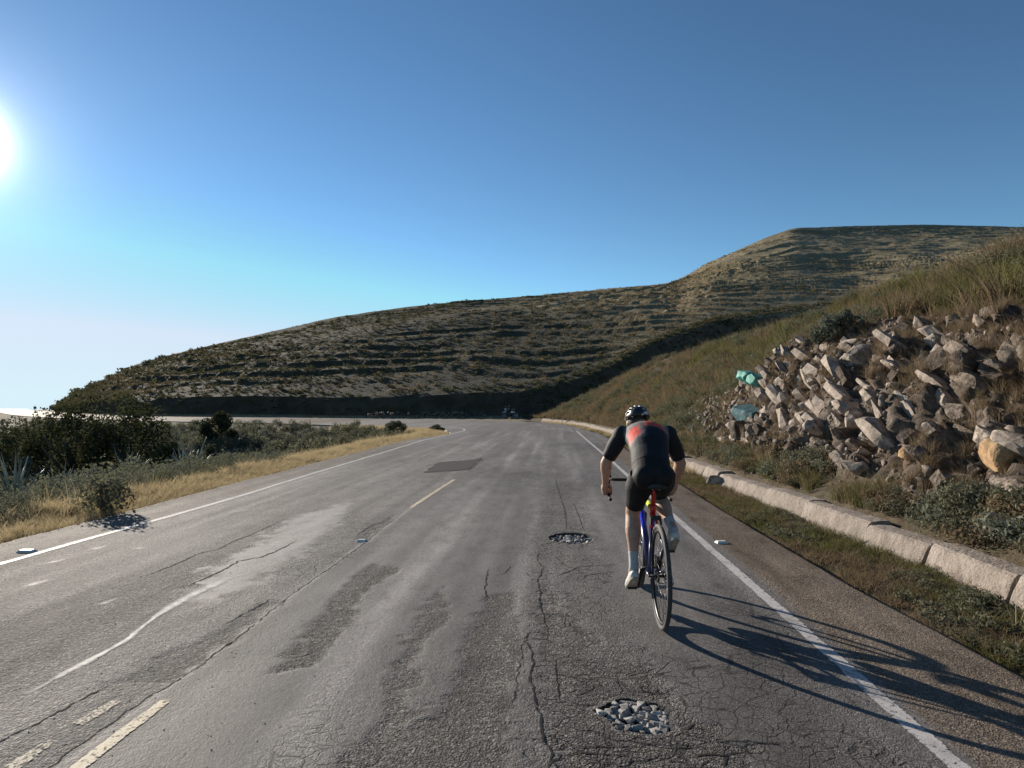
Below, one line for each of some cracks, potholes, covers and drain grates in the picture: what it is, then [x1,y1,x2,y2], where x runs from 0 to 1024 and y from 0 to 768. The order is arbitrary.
pothole [586,695,682,738]
crack [0,685,108,742]
crack [137,524,297,589]
crack [512,554,656,768]
crack [670,722,782,768]
pothole [546,532,597,545]
